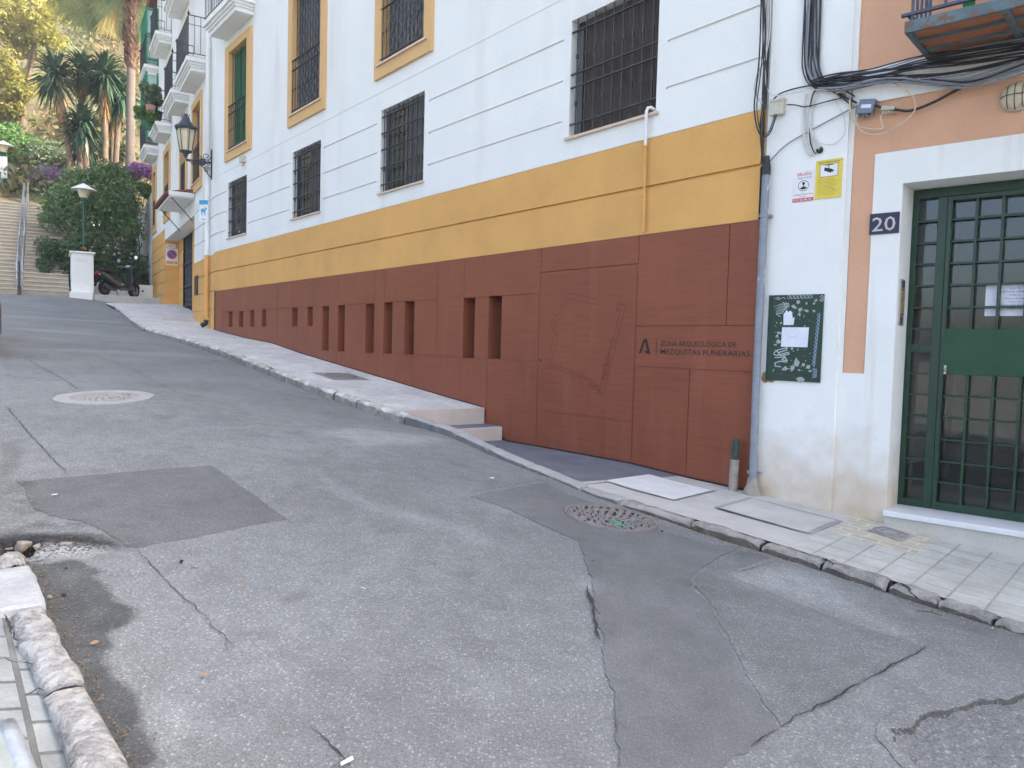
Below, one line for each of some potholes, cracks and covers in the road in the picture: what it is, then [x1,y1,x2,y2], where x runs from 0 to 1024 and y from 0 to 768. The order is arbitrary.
crack [733,546,855,574]
manhole cover [53,390,154,405]
manhole cover [312,372,370,380]
crack [138,549,235,649]
crack [9,408,66,470]
crack [752,646,927,745]
crack [586,585,611,642]
crack [309,725,350,767]
manhole cover [565,504,657,532]
manhole cover [867,525,912,541]
